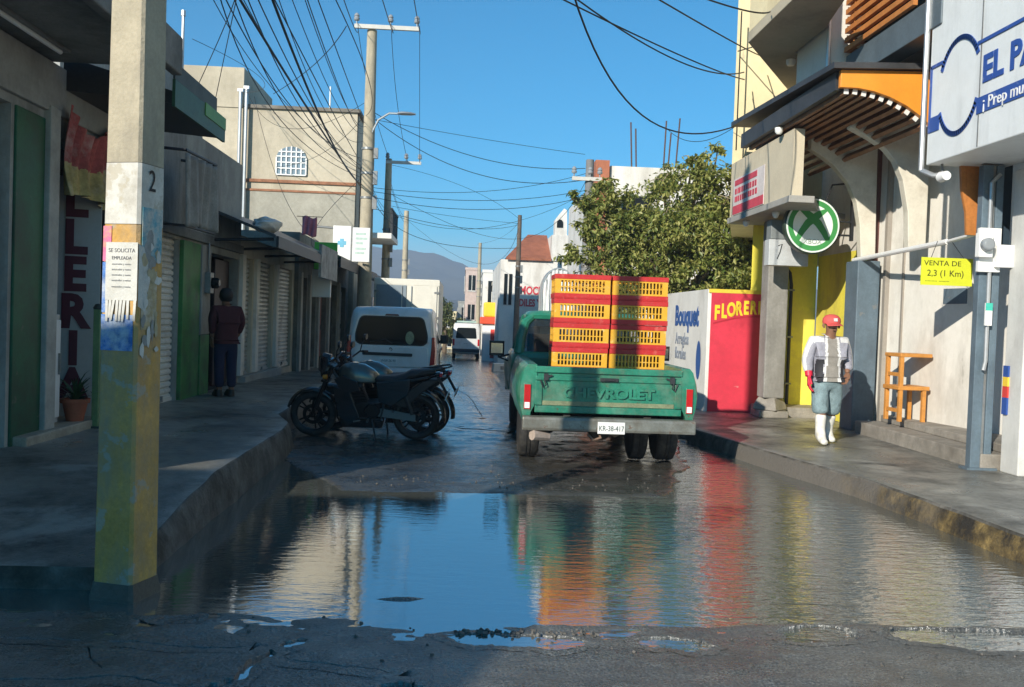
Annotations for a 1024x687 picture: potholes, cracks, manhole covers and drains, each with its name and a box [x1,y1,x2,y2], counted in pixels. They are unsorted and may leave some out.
pothole [624,632,728,657]
crack [0,613,411,687]
pothole [428,630,600,656]
pothole [869,624,1024,656]
